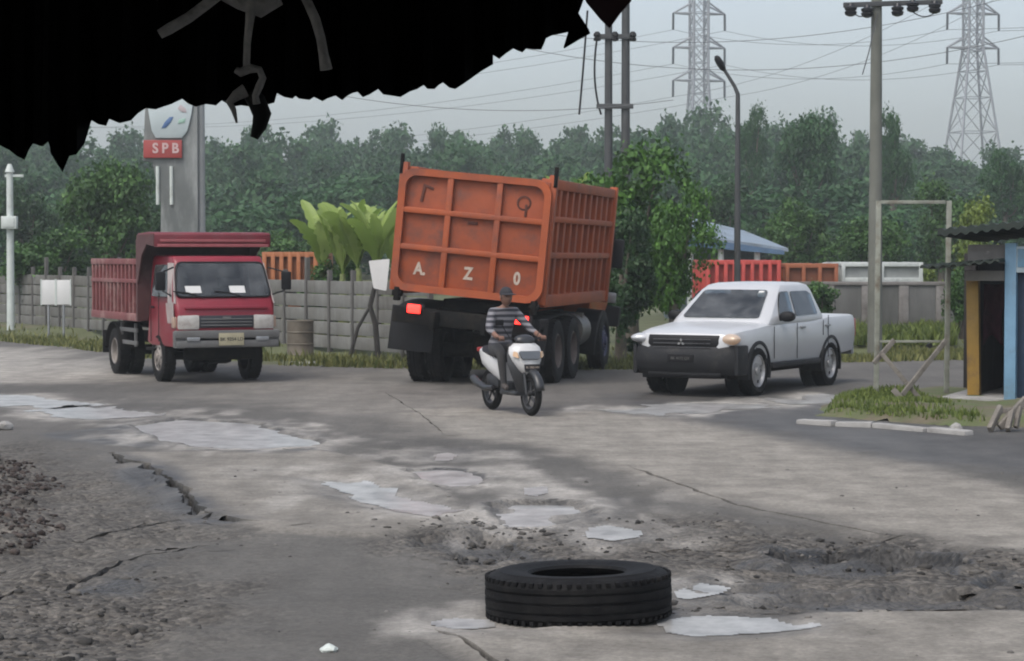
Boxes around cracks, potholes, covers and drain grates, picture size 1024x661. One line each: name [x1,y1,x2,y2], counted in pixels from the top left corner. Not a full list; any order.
pothole [385,523,574,572]
pothole [946,568,1024,599]
crack [0,451,316,611]
crack [372,391,462,436]
crack [607,464,916,559]
pothole [722,543,990,581]
